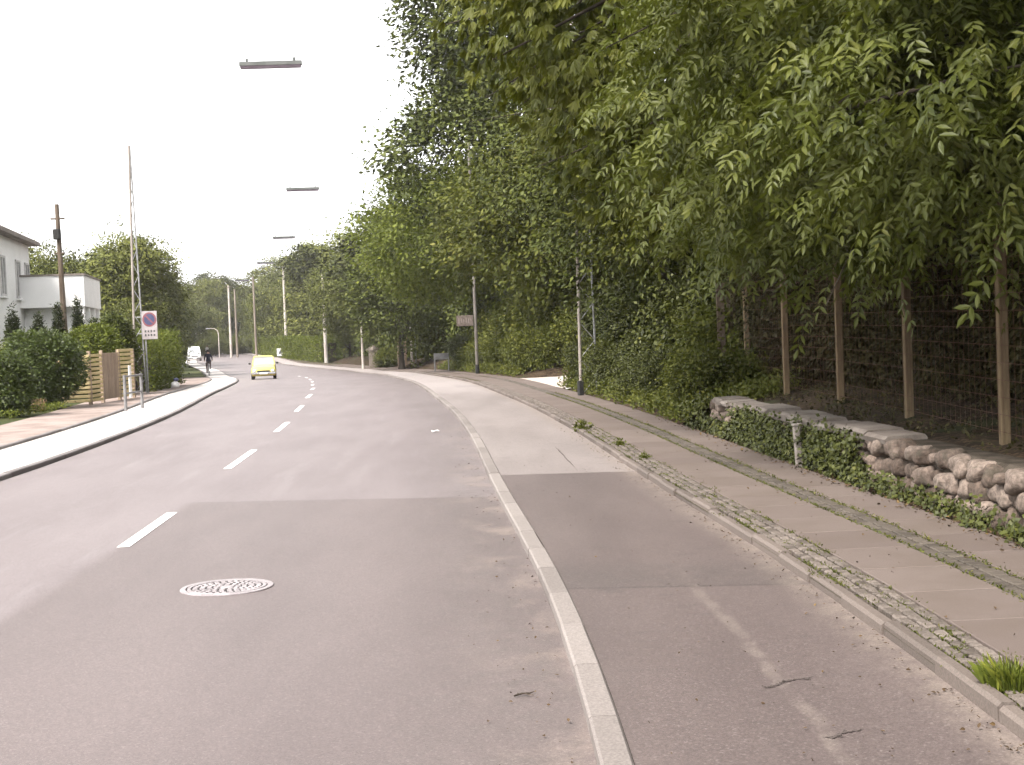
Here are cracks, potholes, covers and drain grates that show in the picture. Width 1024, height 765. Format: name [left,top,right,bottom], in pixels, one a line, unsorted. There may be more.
crack [826,728,864,739]
crack [761,676,813,688]
manhole cover [180,578,274,596]
